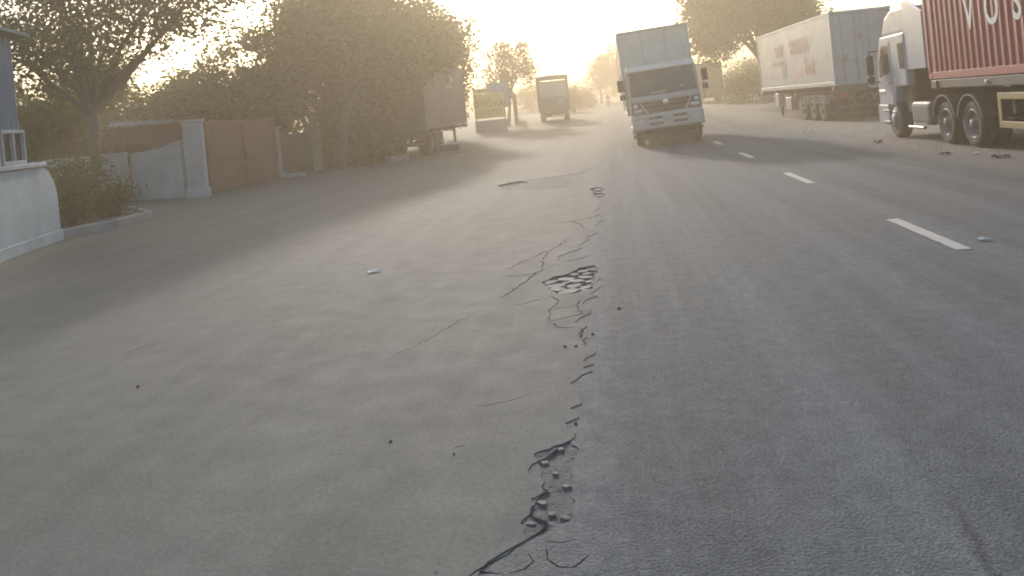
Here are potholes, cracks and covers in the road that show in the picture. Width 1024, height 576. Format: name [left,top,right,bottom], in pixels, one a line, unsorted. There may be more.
crack [505,238,590,345]
pothole [542,265,599,294]
pothole [520,441,579,539]
crack [469,539,590,576]
